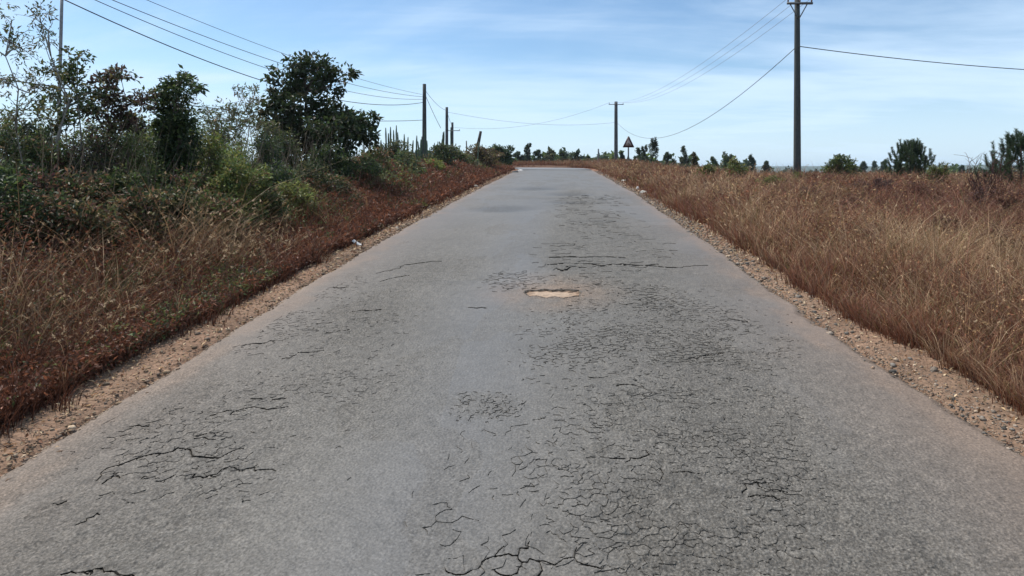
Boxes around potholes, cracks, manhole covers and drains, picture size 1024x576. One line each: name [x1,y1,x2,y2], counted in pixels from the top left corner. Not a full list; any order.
crack [60,567,135,576]
crack [405,195,855,576]
pothole [524,288,582,298]
crack [70,277,421,503]
